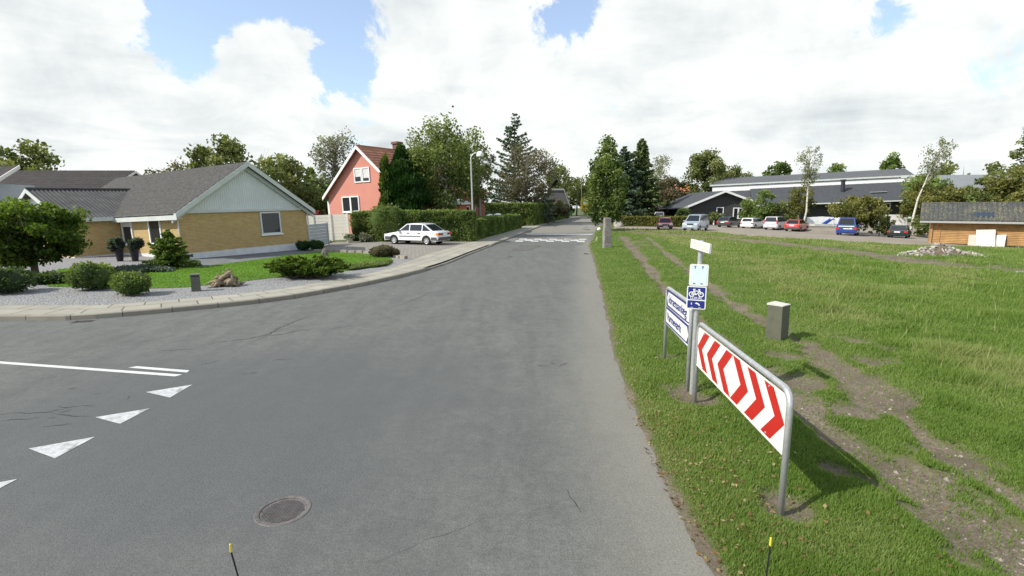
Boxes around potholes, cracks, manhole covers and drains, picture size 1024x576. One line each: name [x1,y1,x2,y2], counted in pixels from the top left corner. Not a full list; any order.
crack [5,388,98,427]
manhole cover [253,495,312,527]
